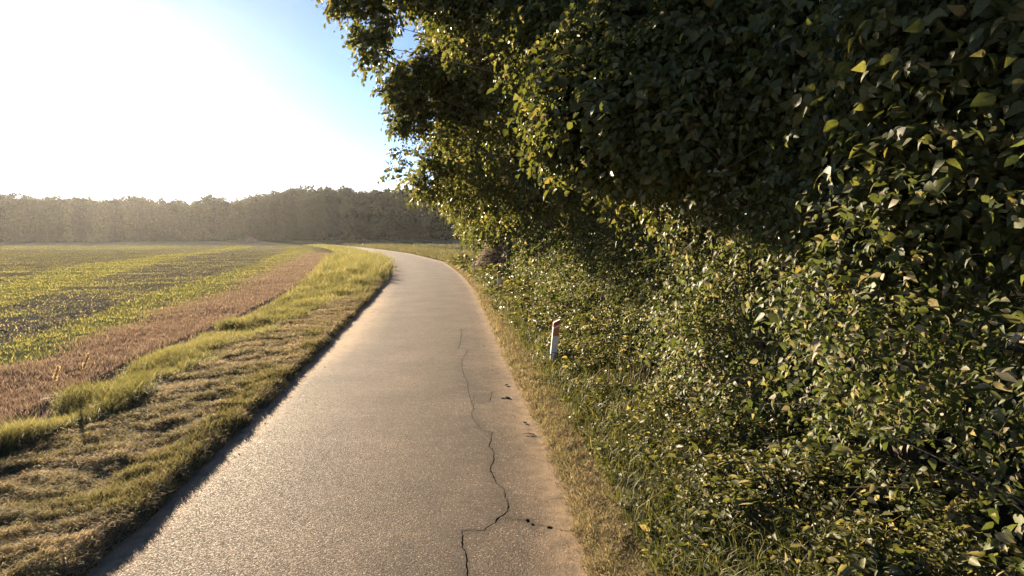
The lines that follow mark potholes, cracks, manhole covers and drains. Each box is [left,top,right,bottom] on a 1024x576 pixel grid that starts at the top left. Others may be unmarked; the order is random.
crack [458,334,570,576]
